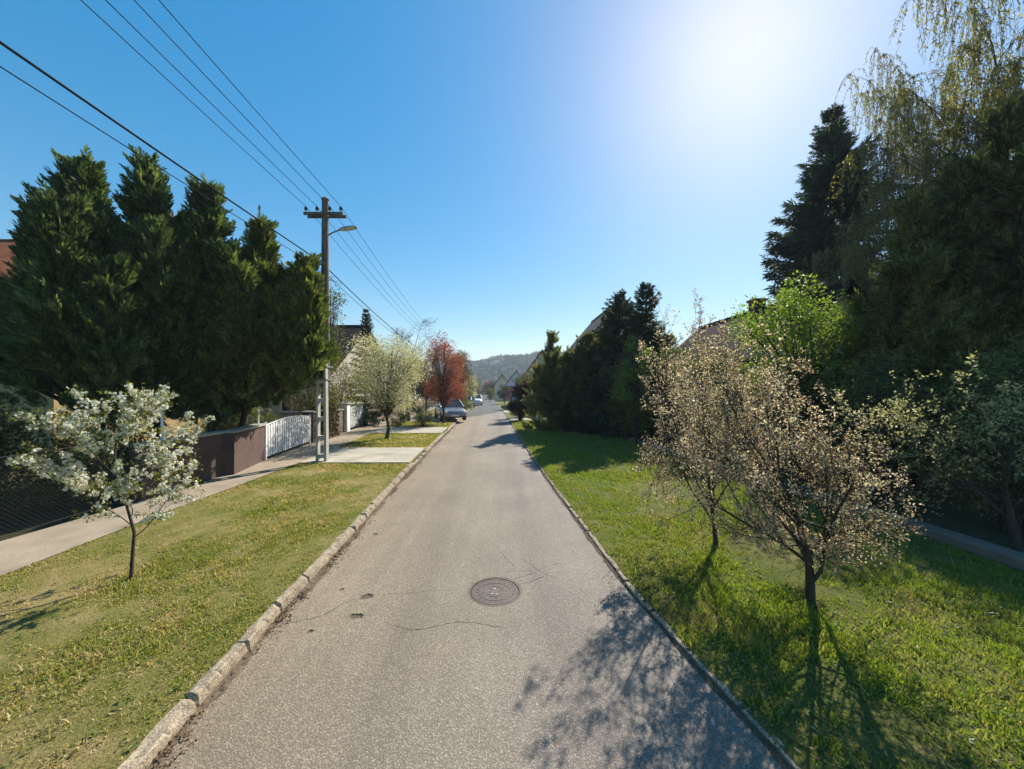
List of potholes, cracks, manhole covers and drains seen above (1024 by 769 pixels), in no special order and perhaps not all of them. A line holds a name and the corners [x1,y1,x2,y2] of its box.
manhole cover [468,577,522,607]
crack [385,622,521,634]
